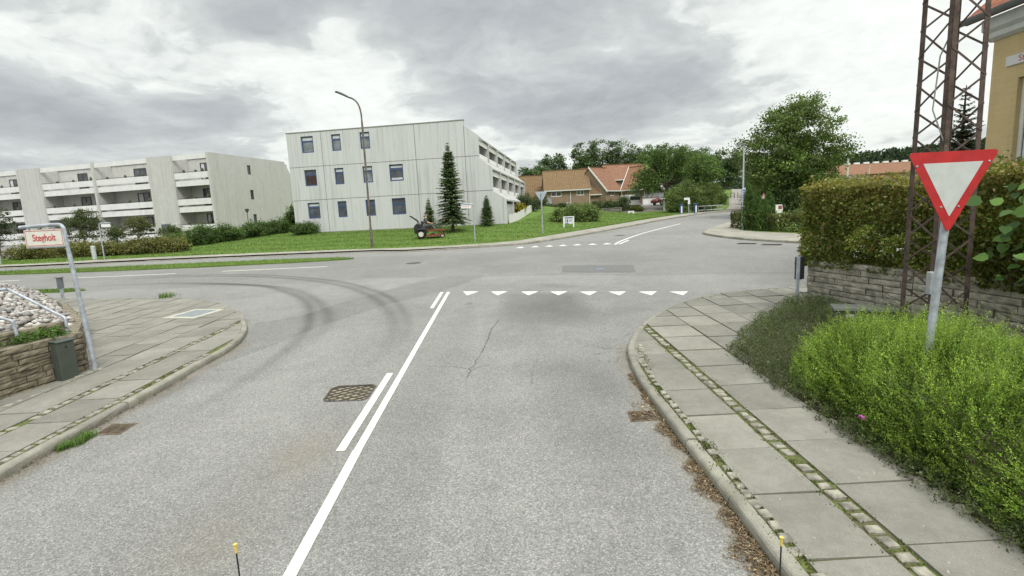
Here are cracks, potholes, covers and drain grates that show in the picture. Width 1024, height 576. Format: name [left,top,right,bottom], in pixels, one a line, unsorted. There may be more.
drain grate [94,423,138,435]
utility cover [164,309,225,319]
drain grate [627,410,657,422]
manhole cover [323,384,376,402]
